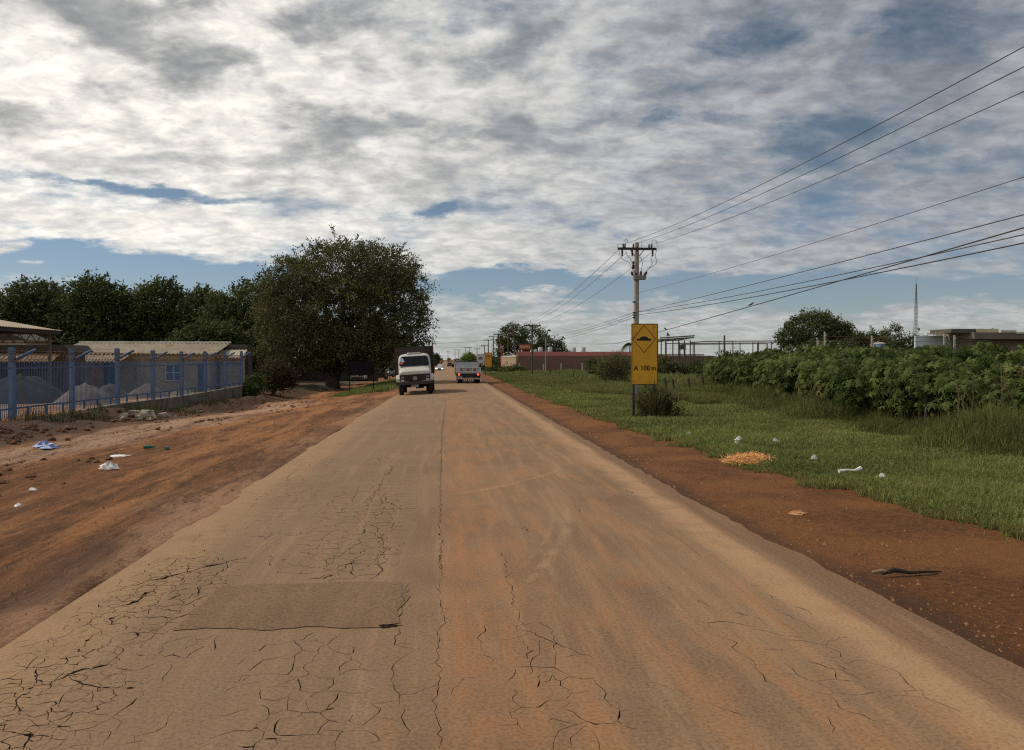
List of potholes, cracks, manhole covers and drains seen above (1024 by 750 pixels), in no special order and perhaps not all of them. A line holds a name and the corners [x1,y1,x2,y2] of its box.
crack [277,455,419,582]
crack [0,534,251,750]
crack [697,585,956,734]
crack [213,633,400,750]
crack [451,552,635,750]
crack [194,458,352,566]
crack [384,583,431,735]
